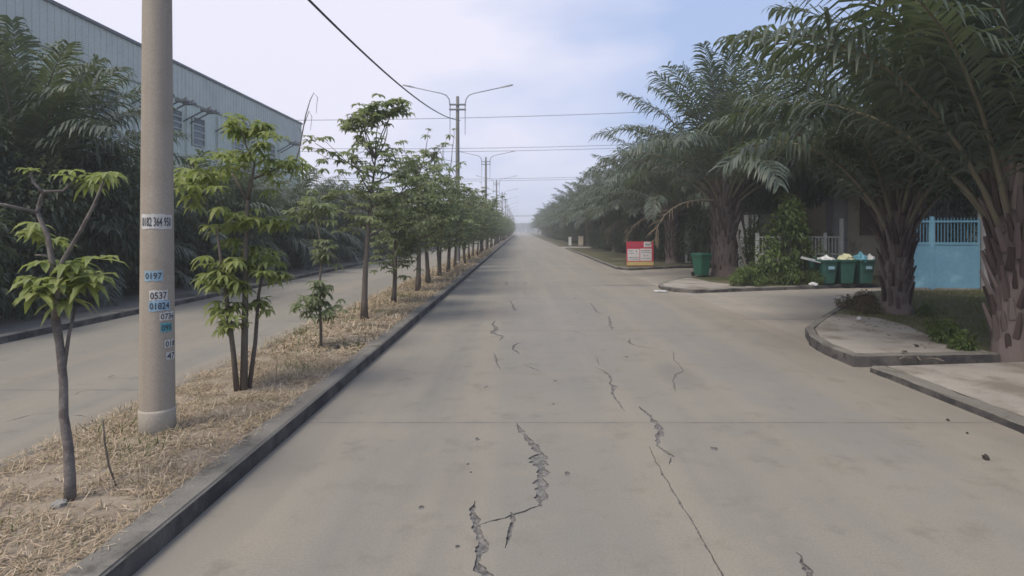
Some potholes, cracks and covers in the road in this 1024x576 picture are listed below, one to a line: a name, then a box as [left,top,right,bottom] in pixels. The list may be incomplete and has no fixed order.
crack [590,303,655,349]
crack [595,359,622,408]
crack [796,552,813,576]
crack [639,352,724,576]
crack [469,424,550,576]
crack [491,283,539,371]
